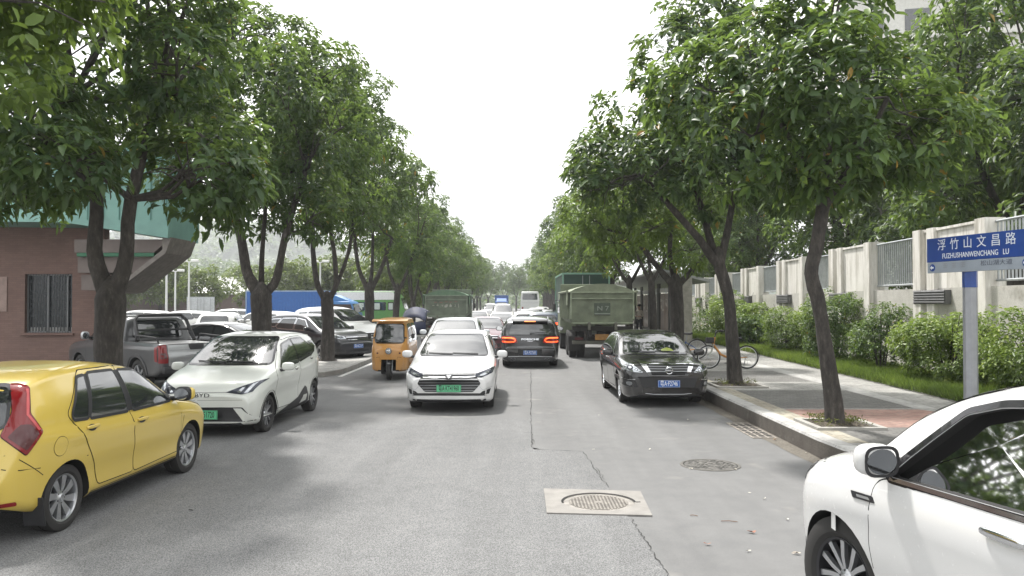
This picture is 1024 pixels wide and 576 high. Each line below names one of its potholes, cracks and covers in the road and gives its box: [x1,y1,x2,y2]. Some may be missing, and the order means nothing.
drain grate [726,422,777,439]
manhole cover [544,488,652,517]
manhole cover [680,459,741,471]
crack [530,377,669,576]
